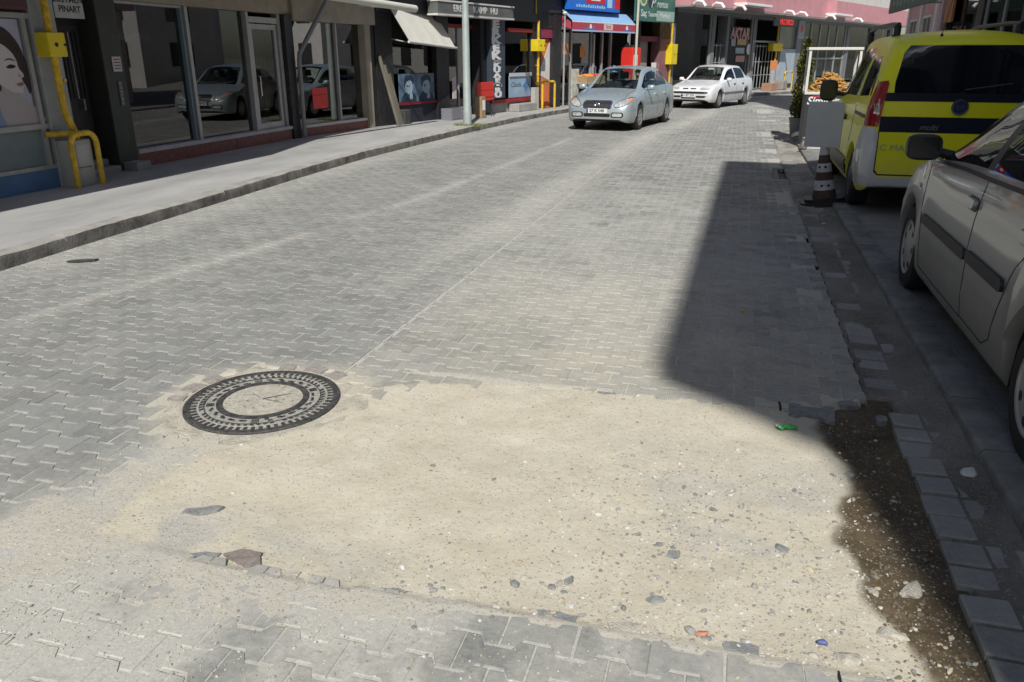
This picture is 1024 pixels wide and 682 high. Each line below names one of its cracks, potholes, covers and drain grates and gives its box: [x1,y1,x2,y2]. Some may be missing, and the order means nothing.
pothole [0,371,992,682]
manhole cover [160,364,369,444]
